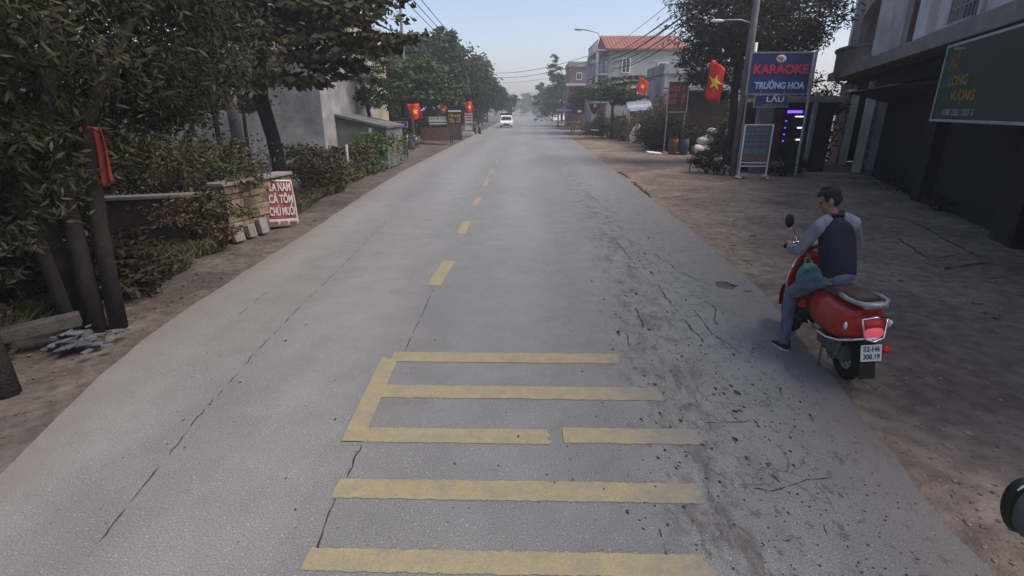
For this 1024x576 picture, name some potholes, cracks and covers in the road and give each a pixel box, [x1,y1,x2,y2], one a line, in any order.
crack [88,217,391,556]
crack [754,475,844,498]
pothole [715,281,739,290]
crack [612,225,741,355]
